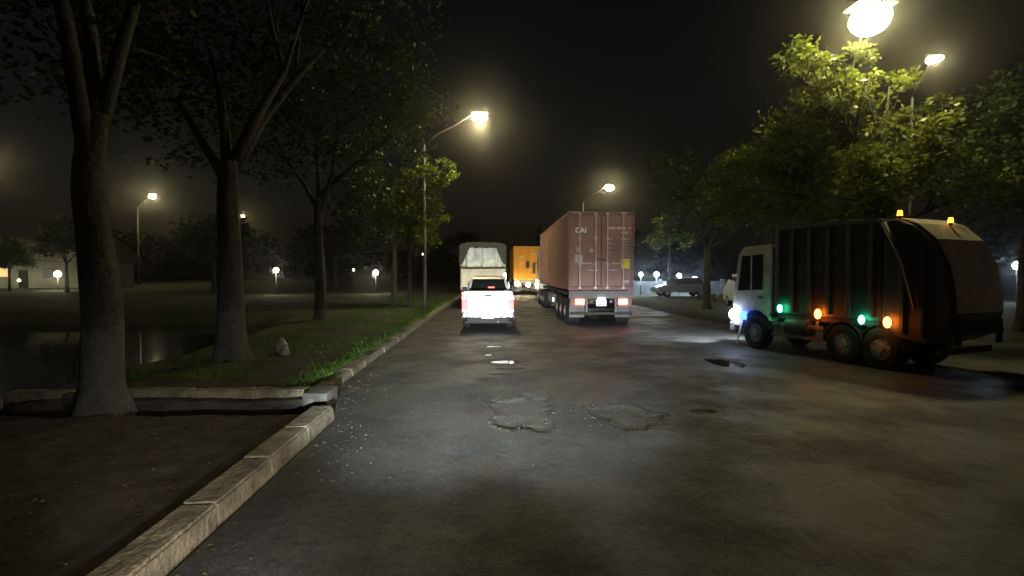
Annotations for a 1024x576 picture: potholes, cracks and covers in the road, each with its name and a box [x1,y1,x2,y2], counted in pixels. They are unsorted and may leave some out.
pothole [478,392,561,434]
pothole [703,358,747,368]
pothole [570,401,671,436]
